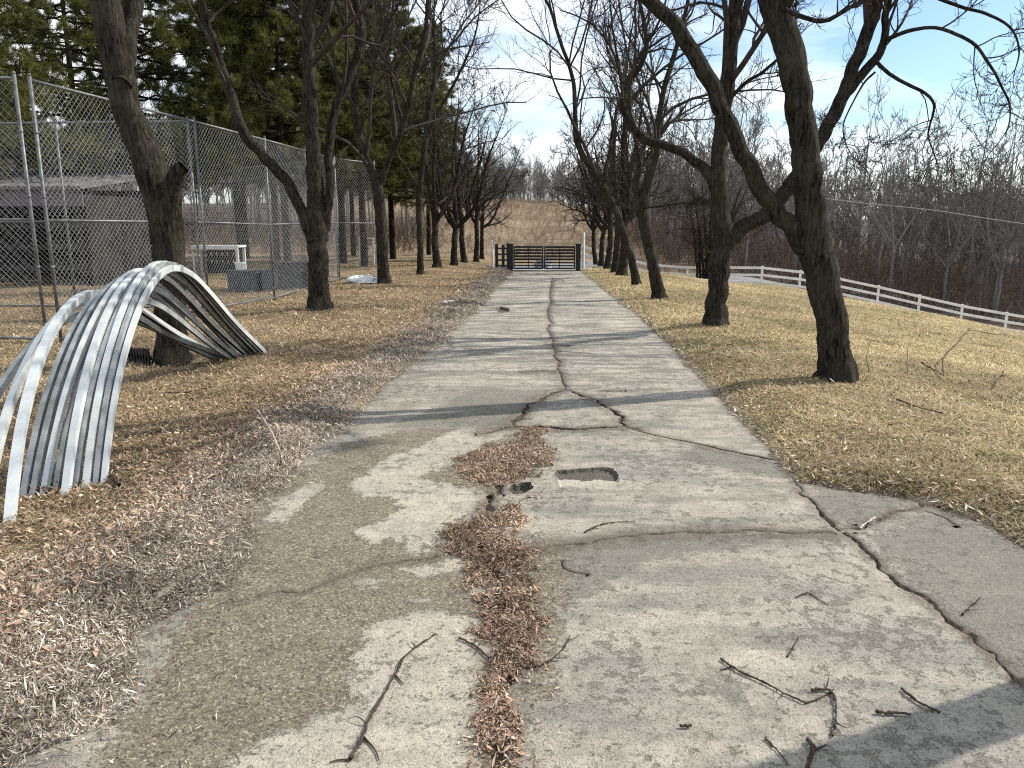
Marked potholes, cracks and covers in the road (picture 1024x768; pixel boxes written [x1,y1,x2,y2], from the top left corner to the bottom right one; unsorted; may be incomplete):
pothole [550,466,624,490]
crack [530,528,836,578]
crack [223,550,457,606]
crack [922,510,961,527]
pothole [502,481,538,496]
crack [475,278,784,464]
